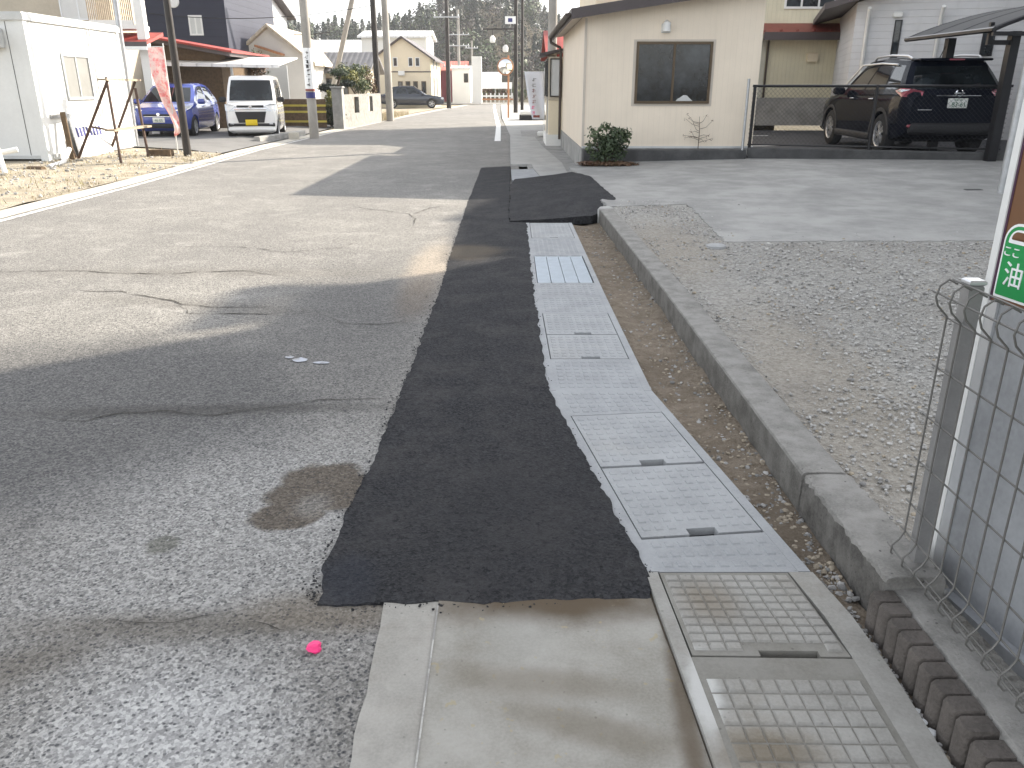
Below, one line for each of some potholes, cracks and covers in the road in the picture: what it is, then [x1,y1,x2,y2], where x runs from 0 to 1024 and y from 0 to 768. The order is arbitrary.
drain grate [534,256,593,283]
crack [73,289,307,314]
crack [100,614,294,630]
crack [51,398,381,421]
